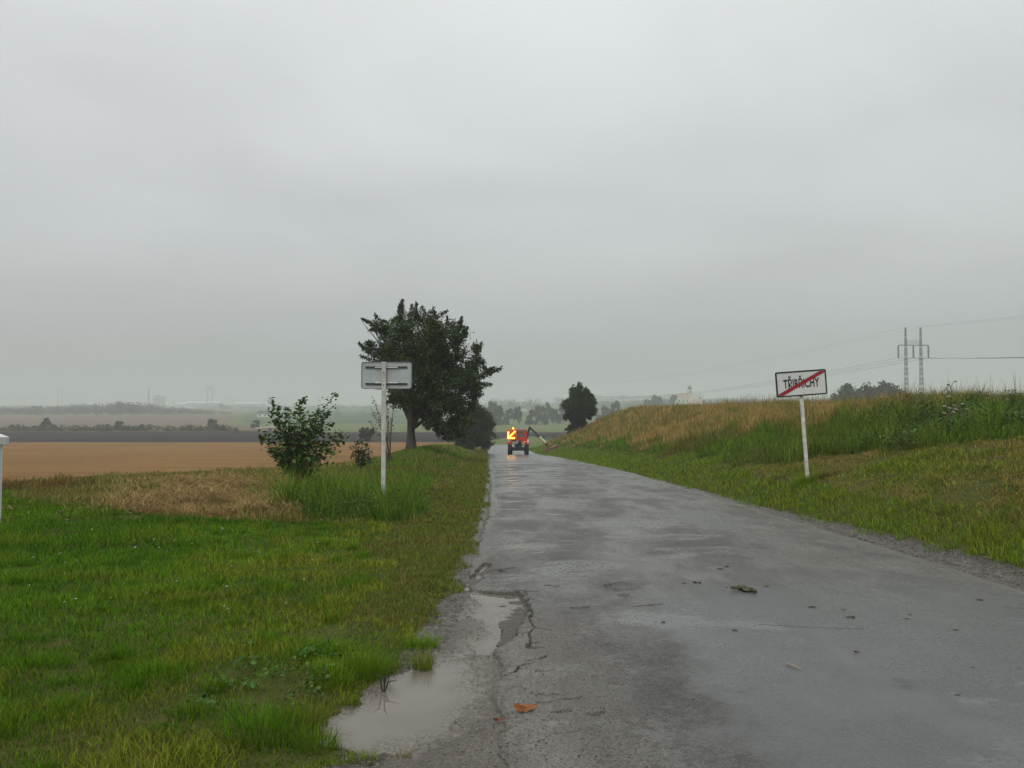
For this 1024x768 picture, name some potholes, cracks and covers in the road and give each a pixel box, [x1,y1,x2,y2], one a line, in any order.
crack [490,566,594,706]
pothole [464,561,495,591]
